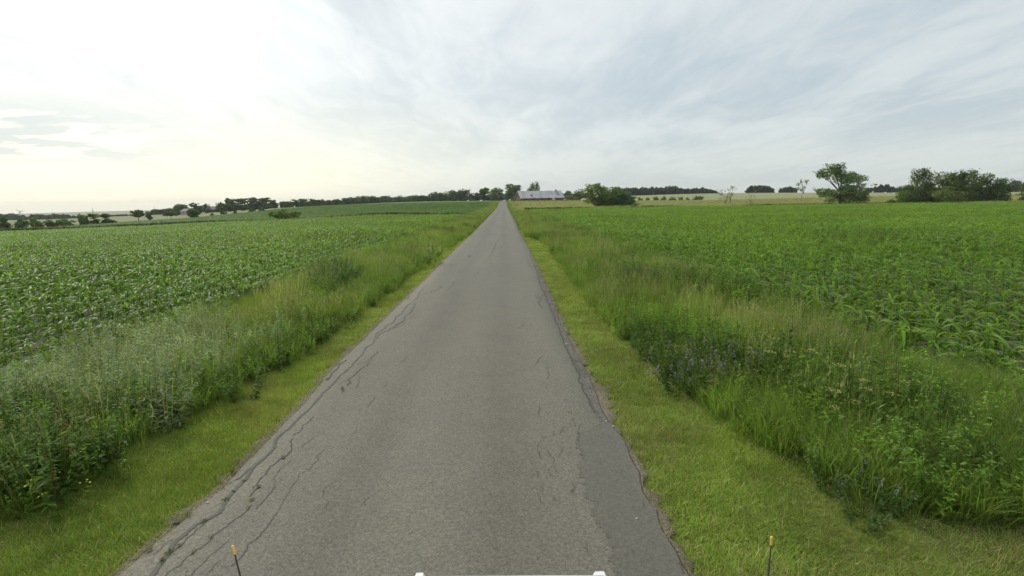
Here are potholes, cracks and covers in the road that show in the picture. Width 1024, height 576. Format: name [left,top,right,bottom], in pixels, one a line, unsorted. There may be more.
crack [527,262,596,503]
crack [149,289,423,576]
